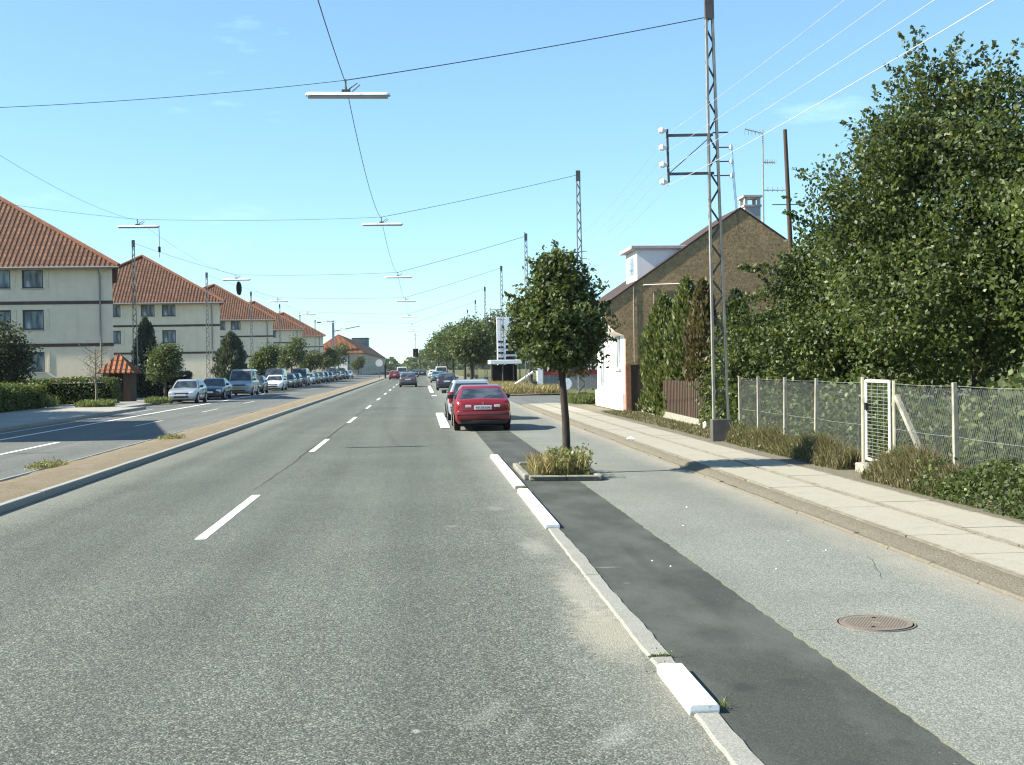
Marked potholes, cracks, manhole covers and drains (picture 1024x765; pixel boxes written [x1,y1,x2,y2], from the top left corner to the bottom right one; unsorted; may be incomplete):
manhole cover [835,615,917,632]
crack [255,409,365,490]
